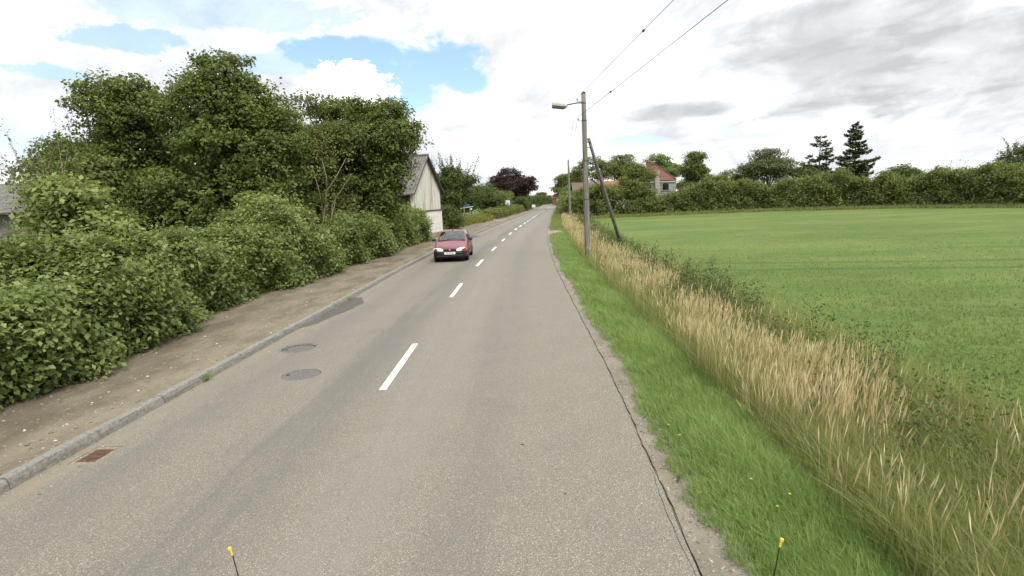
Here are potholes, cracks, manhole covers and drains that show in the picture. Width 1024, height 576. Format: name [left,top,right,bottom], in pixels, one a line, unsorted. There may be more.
manhole cover [279,344,318,353]
manhole cover [282,369,320,381]
drain grate [68,446,122,465]
